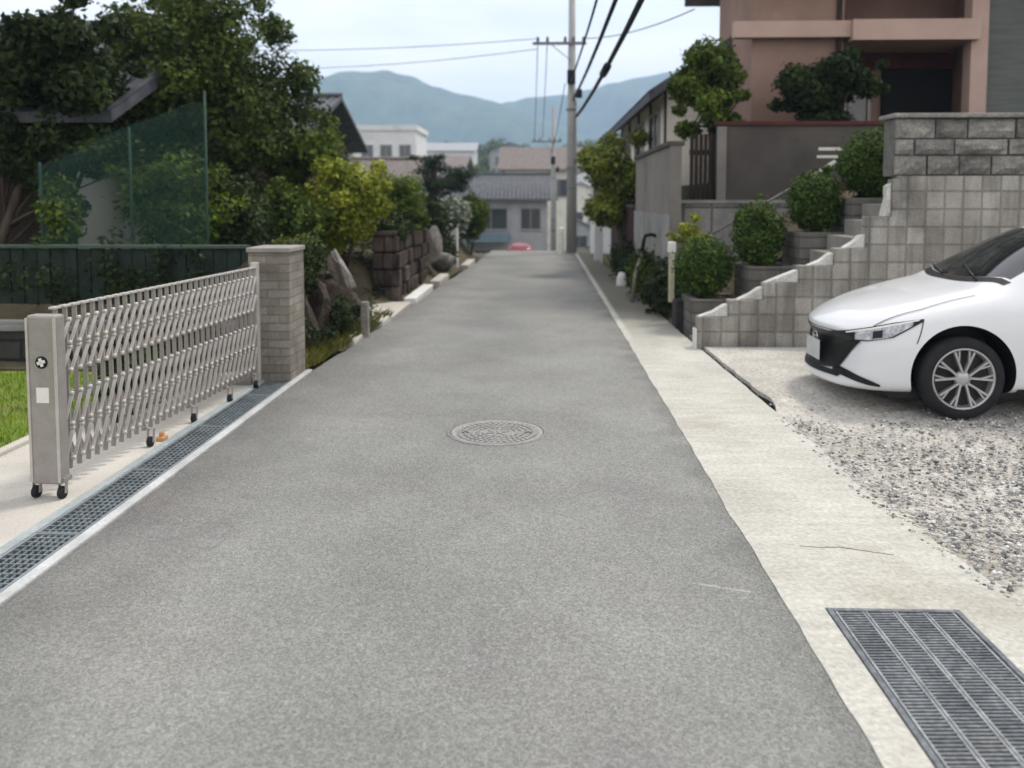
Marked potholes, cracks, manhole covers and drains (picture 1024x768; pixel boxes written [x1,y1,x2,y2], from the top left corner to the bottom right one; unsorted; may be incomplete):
drain grate [198,395,271,426]
drain grate [0,533,81,593]
drain grate [36,469,168,534]
drain grate [826,607,1024,768]
drain grate [133,426,228,470]
drain grate [245,381,290,395]
manhole cover [447,419,547,446]
